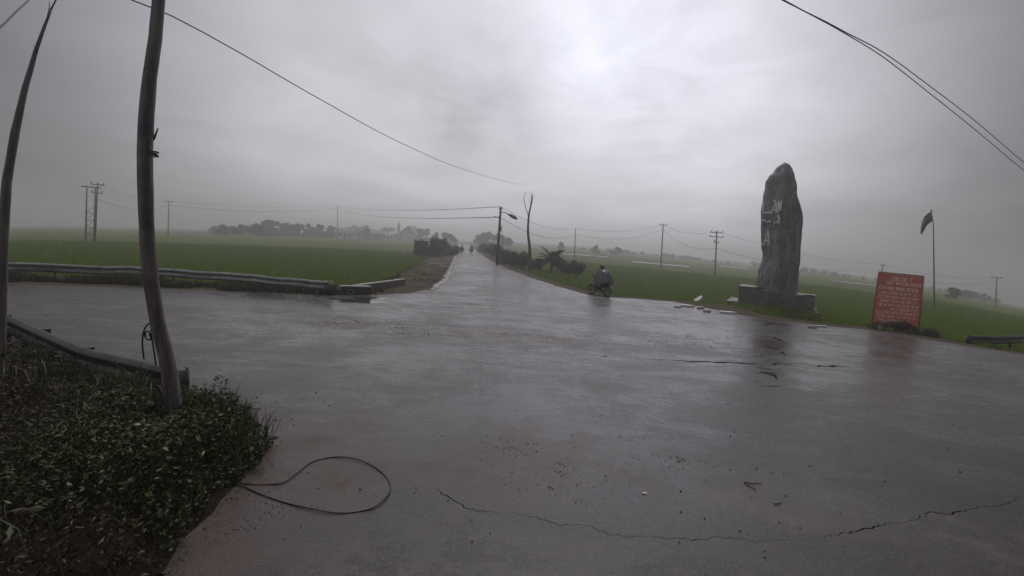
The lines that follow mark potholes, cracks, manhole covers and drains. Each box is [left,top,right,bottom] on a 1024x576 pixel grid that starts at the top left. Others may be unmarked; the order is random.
crack [435,488,1024,543]
crack [653,323,842,387]
